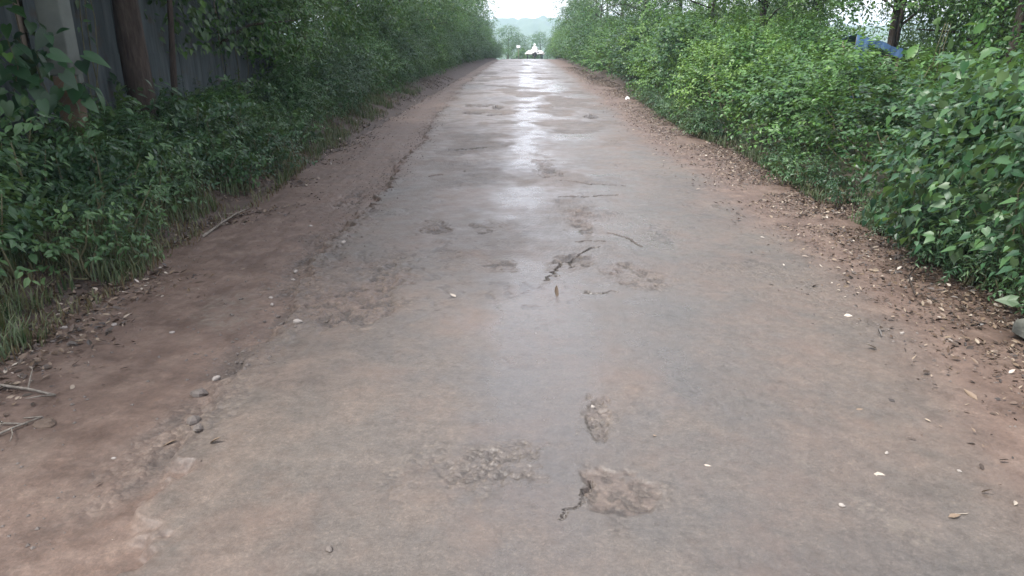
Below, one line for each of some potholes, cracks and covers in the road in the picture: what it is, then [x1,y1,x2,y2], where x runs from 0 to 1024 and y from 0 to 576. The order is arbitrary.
pothole [579,458,669,534]
crack [544,232,643,281]
pothole [581,389,617,445]
pothole [463,219,508,235]
pothole [597,261,675,293]
crack [561,480,595,520]
pothole [391,434,574,497]
pothole [553,199,601,237]
pothole [409,218,465,237]
